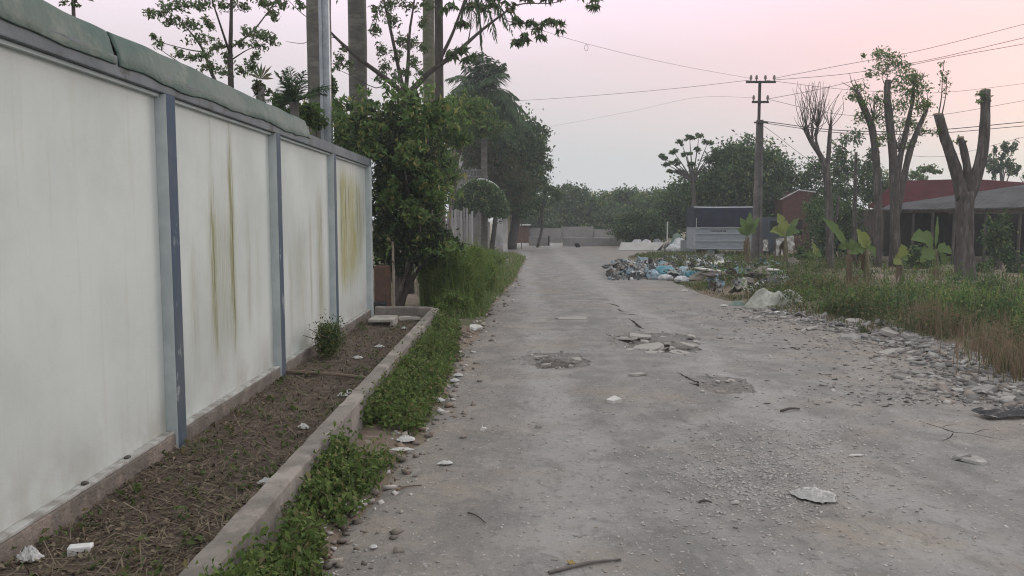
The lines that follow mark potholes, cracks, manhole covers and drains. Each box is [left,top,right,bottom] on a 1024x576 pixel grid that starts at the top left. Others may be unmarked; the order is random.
pothole [688,373,756,395]
pothole [608,330,705,355]
crack [927,423,991,440]
pothole [513,350,592,369]
